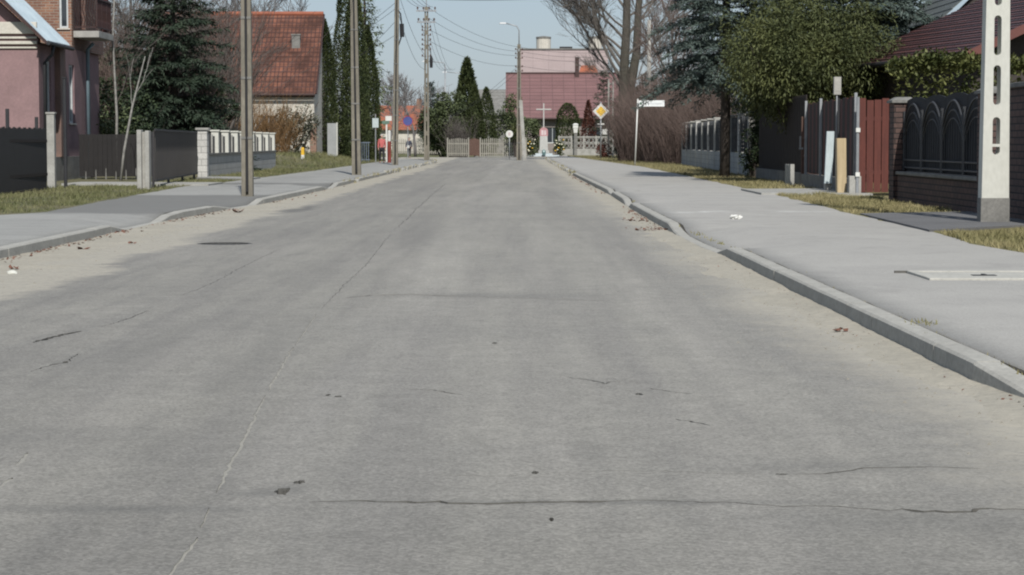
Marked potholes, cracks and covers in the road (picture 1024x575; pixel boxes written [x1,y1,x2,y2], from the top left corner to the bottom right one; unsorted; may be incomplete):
crack [822,466,980,474]
crack [33,310,148,370]
manhole cover [894,270,1024,280]
crack [316,500,1024,513]
